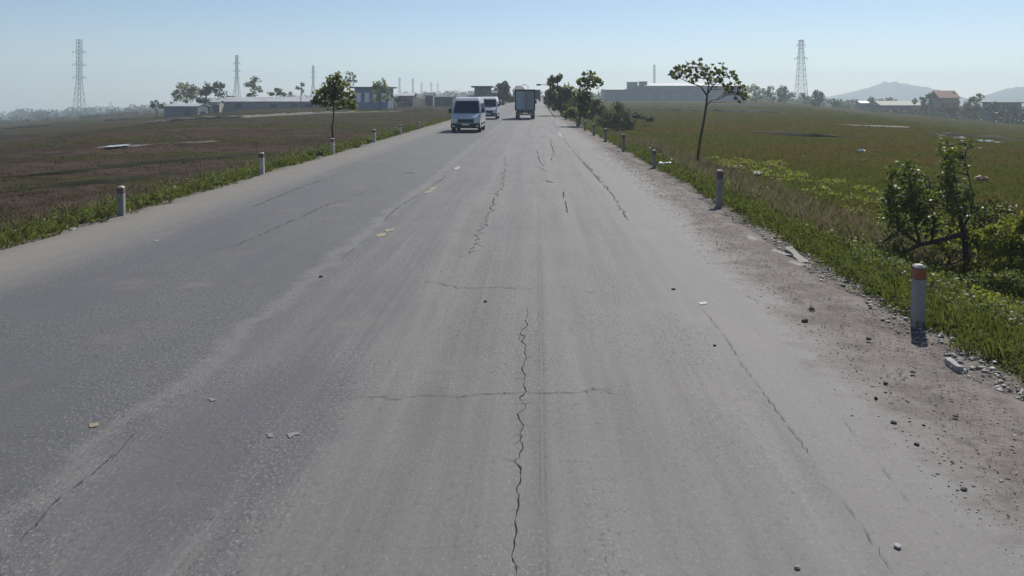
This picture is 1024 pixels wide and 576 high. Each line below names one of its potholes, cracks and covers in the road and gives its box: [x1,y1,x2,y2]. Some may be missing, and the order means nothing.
crack [516,137,568,246]
crack [357,315,610,574]
crack [455,153,507,253]
